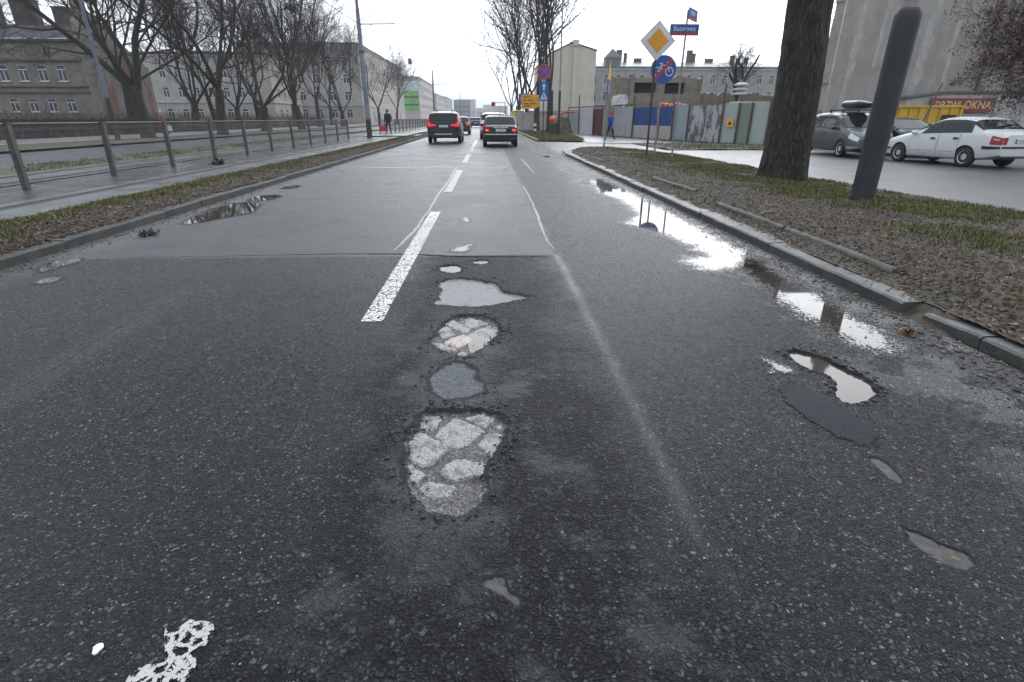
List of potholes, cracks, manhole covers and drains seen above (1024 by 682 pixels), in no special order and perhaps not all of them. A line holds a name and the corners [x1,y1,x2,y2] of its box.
pothole [433,277,530,307]
pothole [438,264,463,273]
pothole [396,407,512,517]
pothole [868,456,906,486]
pothole [479,573,523,608]
pothole [425,360,487,402]
pothole [898,525,980,573]
pothole [787,349,880,404]
pothole [427,313,503,356]
